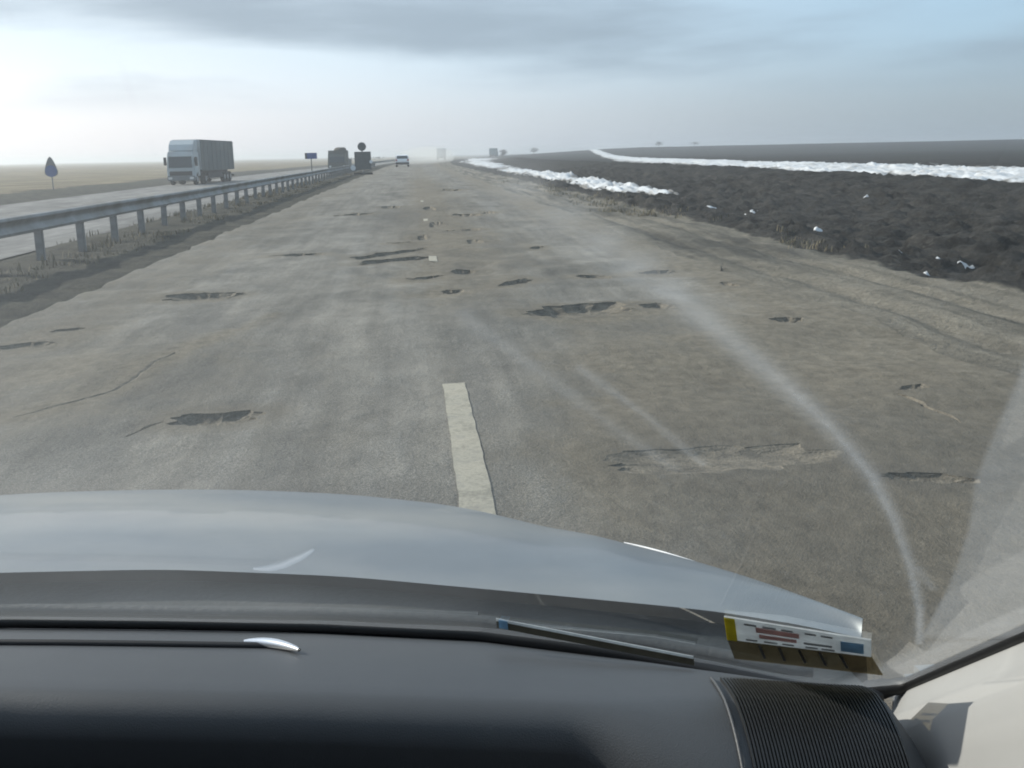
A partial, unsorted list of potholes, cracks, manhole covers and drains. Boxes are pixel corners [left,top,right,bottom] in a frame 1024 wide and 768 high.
pothole [881,472,981,484]
pothole [167,410,266,426]
pothole [0,341,57,350]
crack [14,352,175,437]
pothole [349,249,425,260]
pothole [525,302,637,319]
crack [899,394,961,423]
pothole [497,278,532,287]
pothole [603,443,845,476]
pothole [359,256,429,265]
pothole [162,292,244,301]
